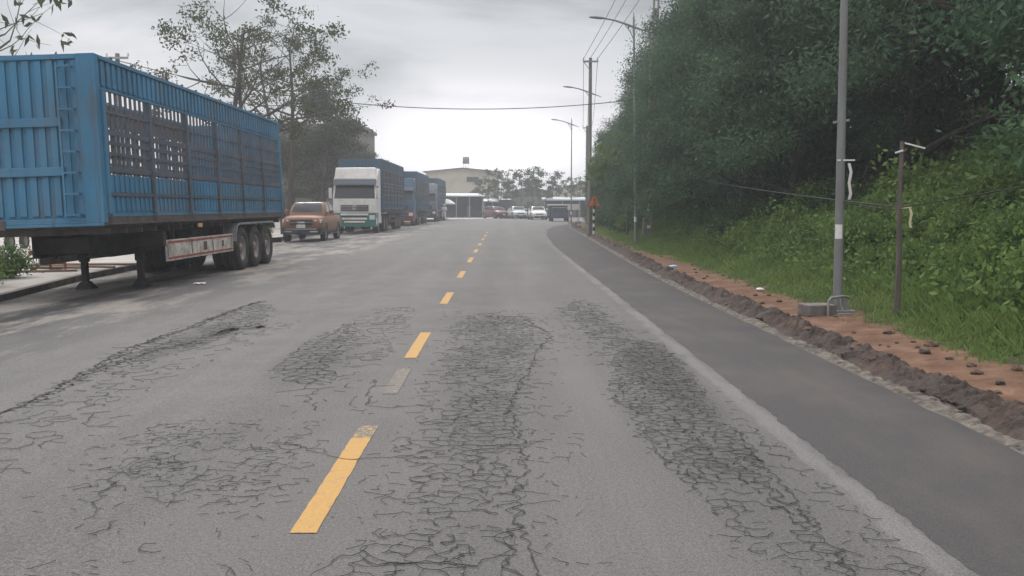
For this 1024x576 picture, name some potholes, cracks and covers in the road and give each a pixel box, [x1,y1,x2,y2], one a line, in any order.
crack [267,307,424,414]
crack [11,418,406,576]
crack [550,300,926,576]
crack [0,301,291,477]
crack [311,310,613,576]
